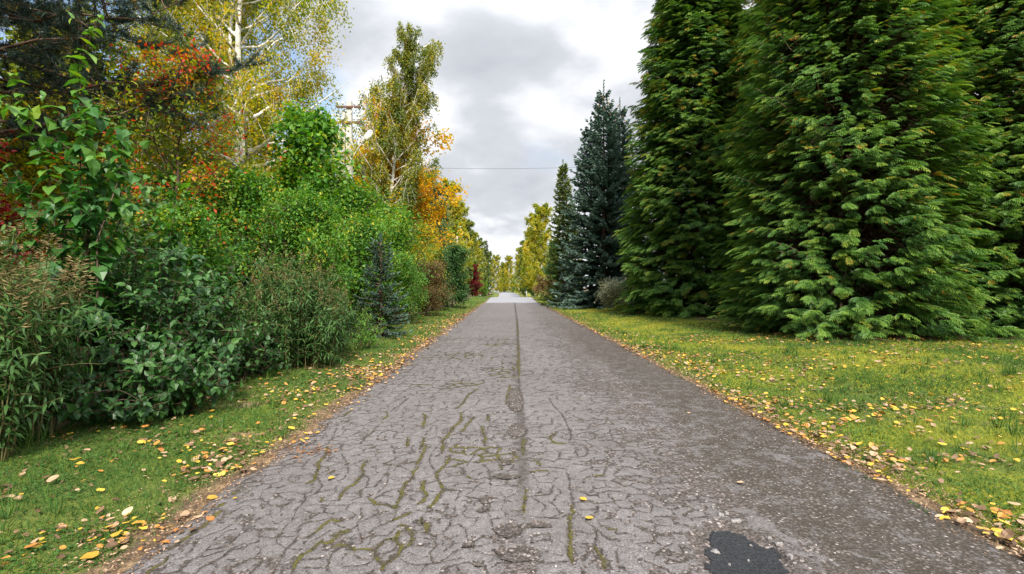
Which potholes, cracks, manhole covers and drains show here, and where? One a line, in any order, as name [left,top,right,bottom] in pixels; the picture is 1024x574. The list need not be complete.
pothole [507,388,526,411]
pothole [492,522,521,538]
crack [132,317,744,574]
